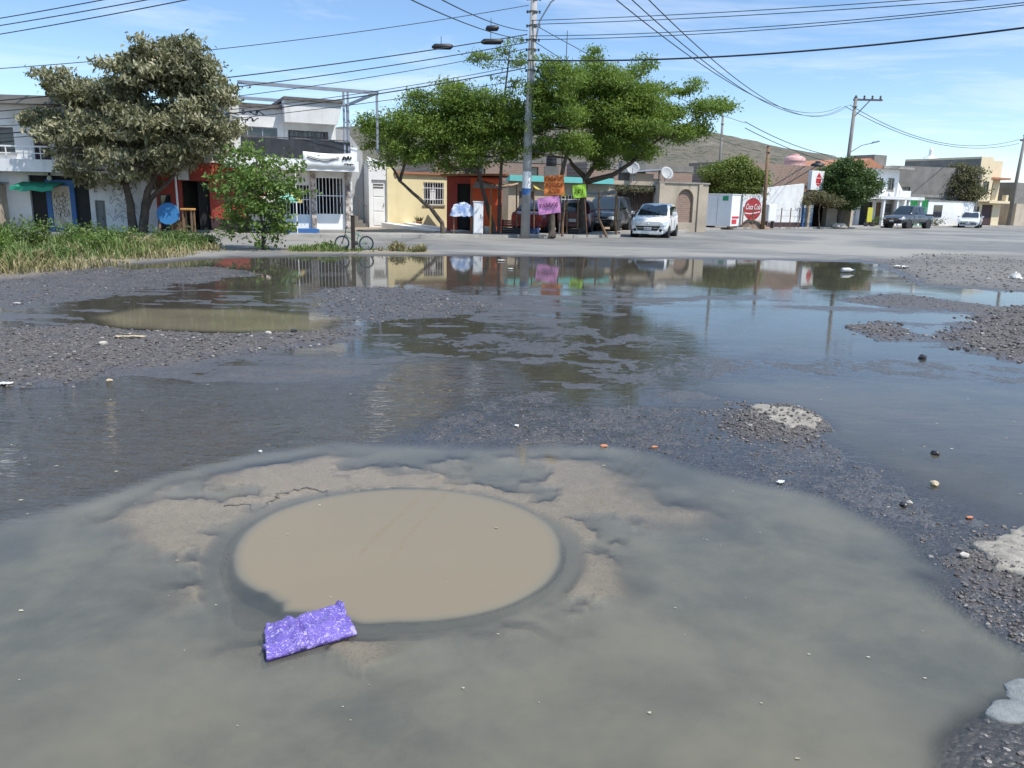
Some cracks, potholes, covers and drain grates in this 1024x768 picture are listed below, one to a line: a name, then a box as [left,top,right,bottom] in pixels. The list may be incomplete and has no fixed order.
crack [224,487,329,511]
pothole [190,481,593,652]
